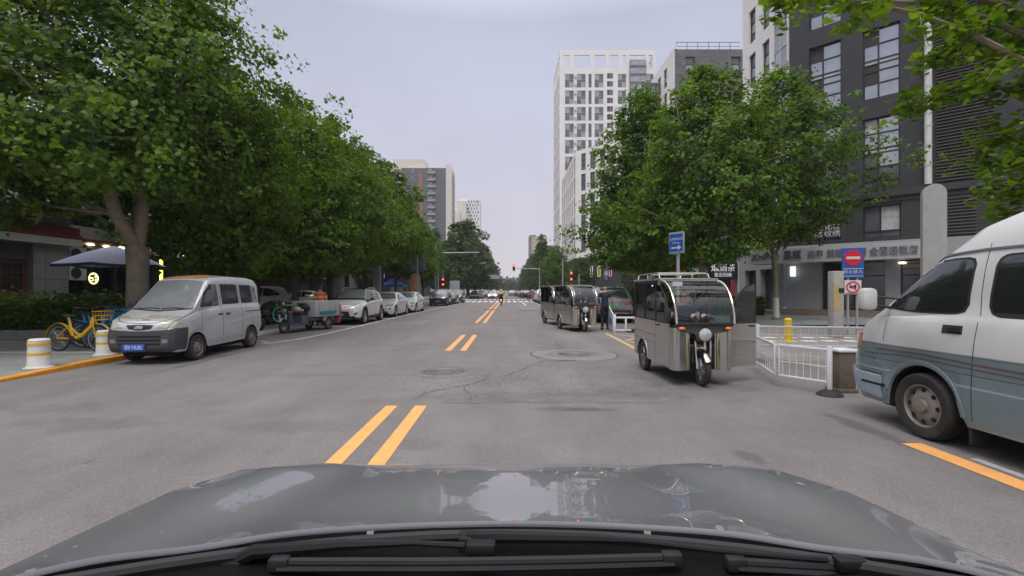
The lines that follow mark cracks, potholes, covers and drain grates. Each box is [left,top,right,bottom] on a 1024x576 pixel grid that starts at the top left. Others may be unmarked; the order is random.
crack [419,340,565,401]
manhole cover [530,349,618,361]
manhole cover [411,366,475,378]
